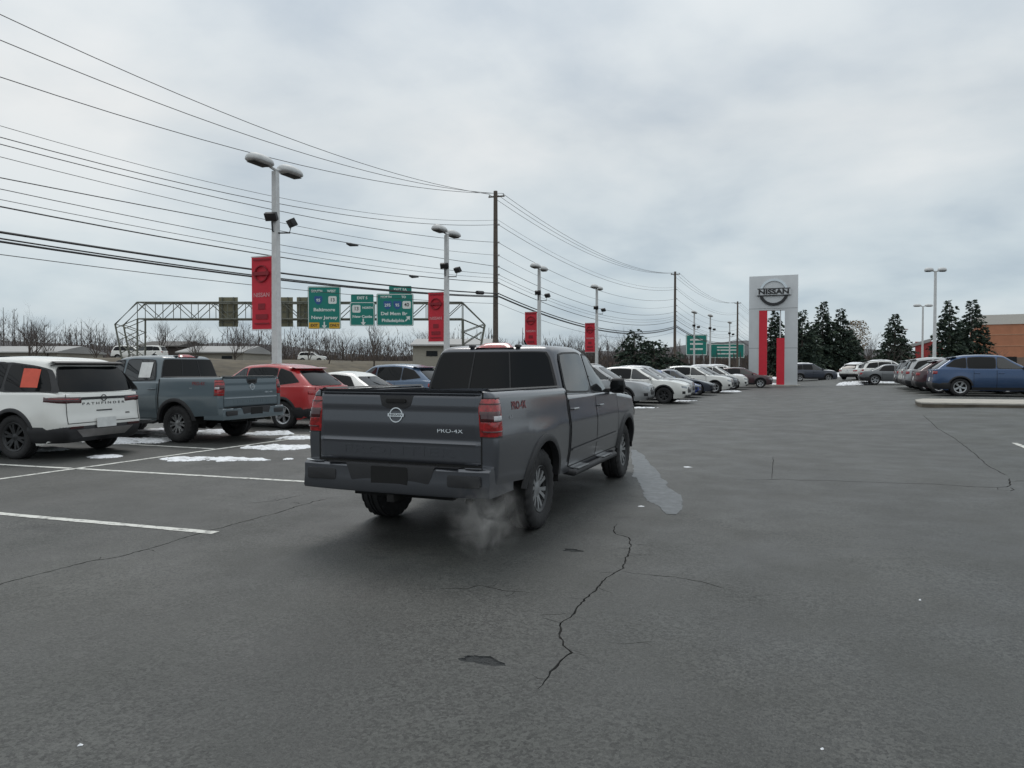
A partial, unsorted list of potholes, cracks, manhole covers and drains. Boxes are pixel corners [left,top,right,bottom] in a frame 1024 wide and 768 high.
crack [770,460,1014,491]
crack [426,526,729,688]
pothole [458,655,506,667]
